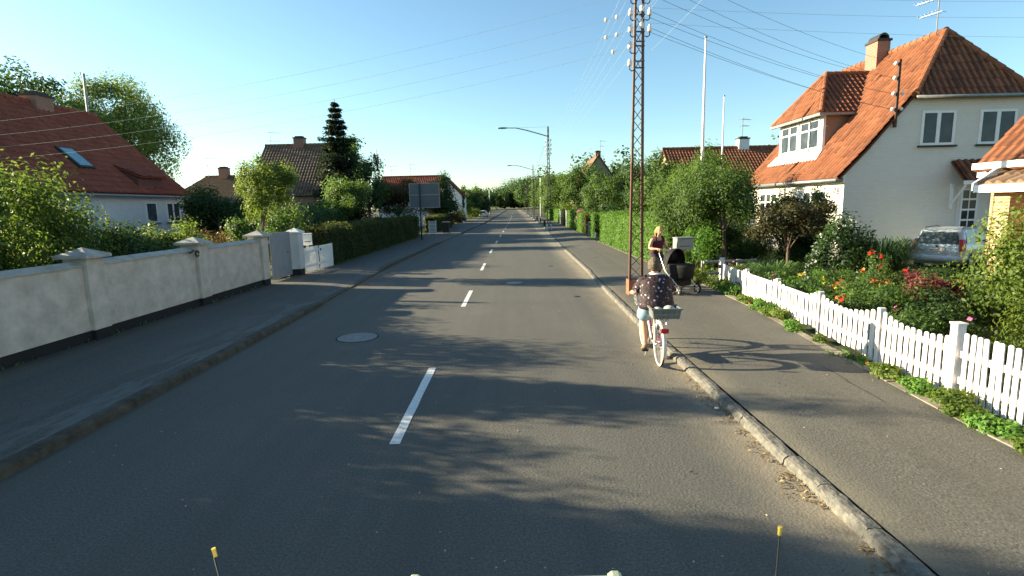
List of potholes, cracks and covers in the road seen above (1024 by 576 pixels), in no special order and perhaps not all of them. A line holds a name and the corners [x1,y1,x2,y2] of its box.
manhole cover [336,332,379,343]
